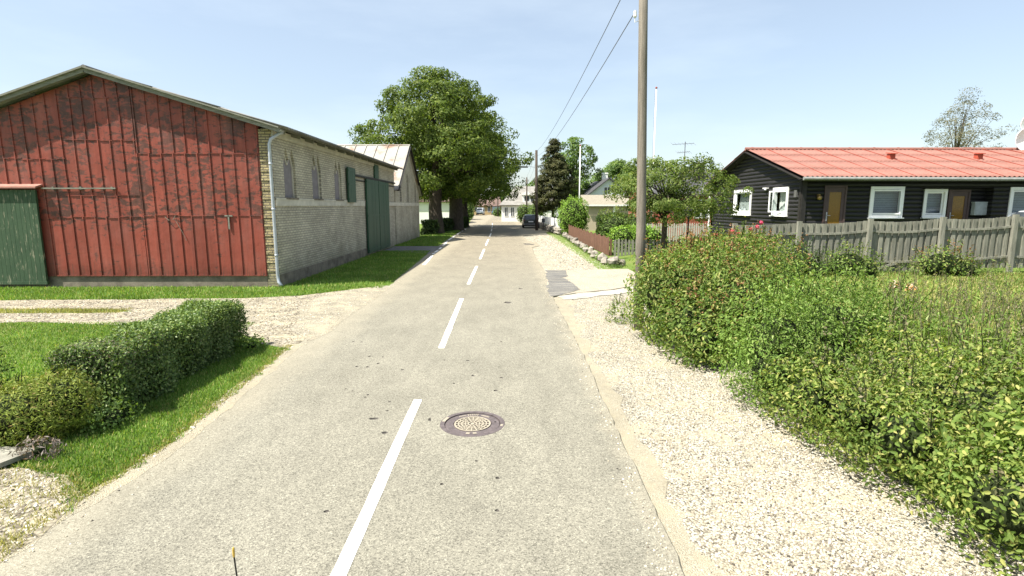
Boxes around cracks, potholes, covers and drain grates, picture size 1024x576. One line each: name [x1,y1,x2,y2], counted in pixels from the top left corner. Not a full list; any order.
manhole cover [440,411,505,437]
